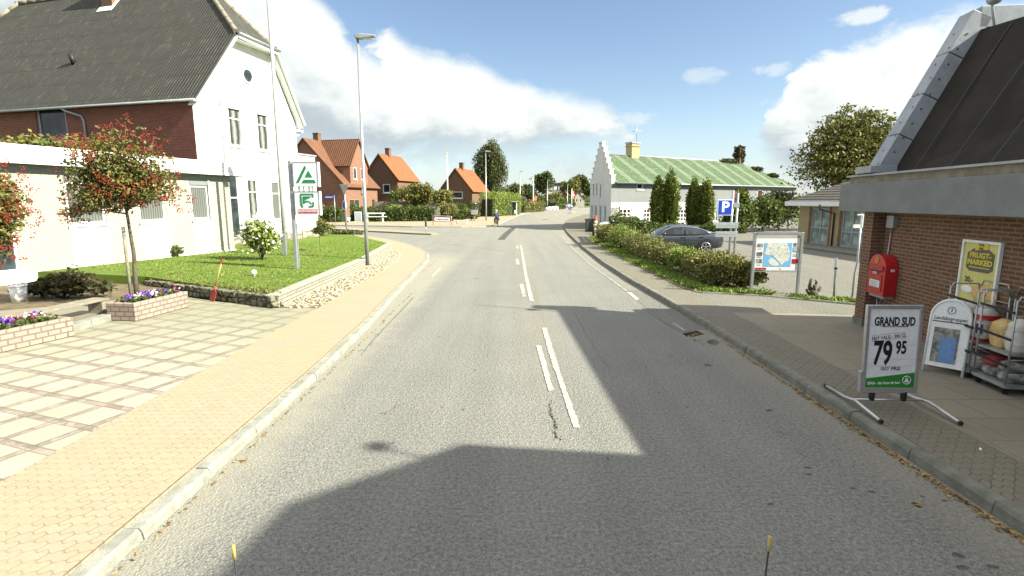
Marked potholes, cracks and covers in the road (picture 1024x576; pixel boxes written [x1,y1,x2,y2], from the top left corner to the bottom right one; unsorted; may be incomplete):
crack [545,400,566,445]
